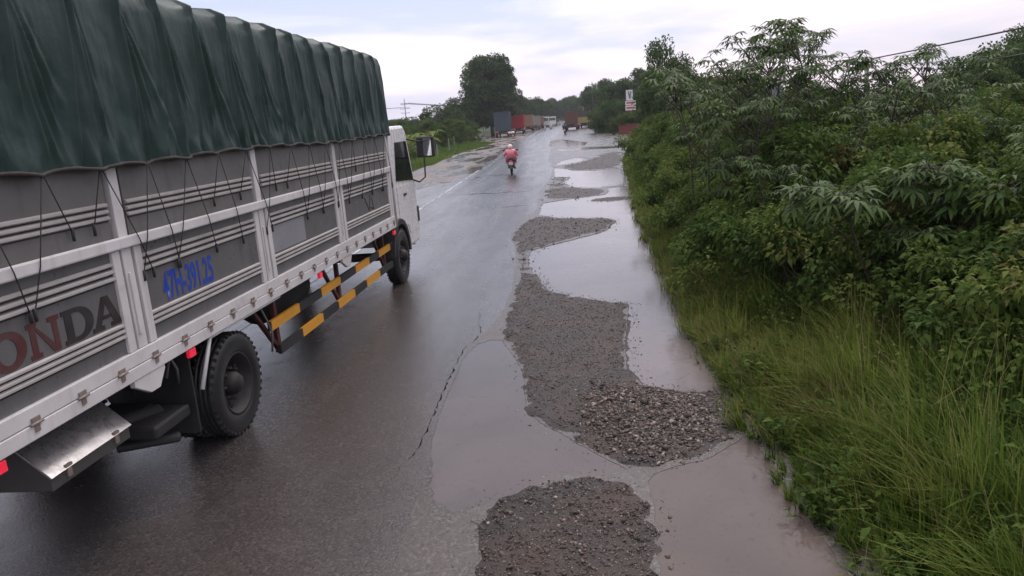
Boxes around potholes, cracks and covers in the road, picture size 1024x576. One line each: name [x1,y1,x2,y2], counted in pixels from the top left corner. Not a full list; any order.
pothole [528,186,718,391]
pothole [431,340,627,512]
crack [393,317,481,478]
pothole [648,434,849,576]
